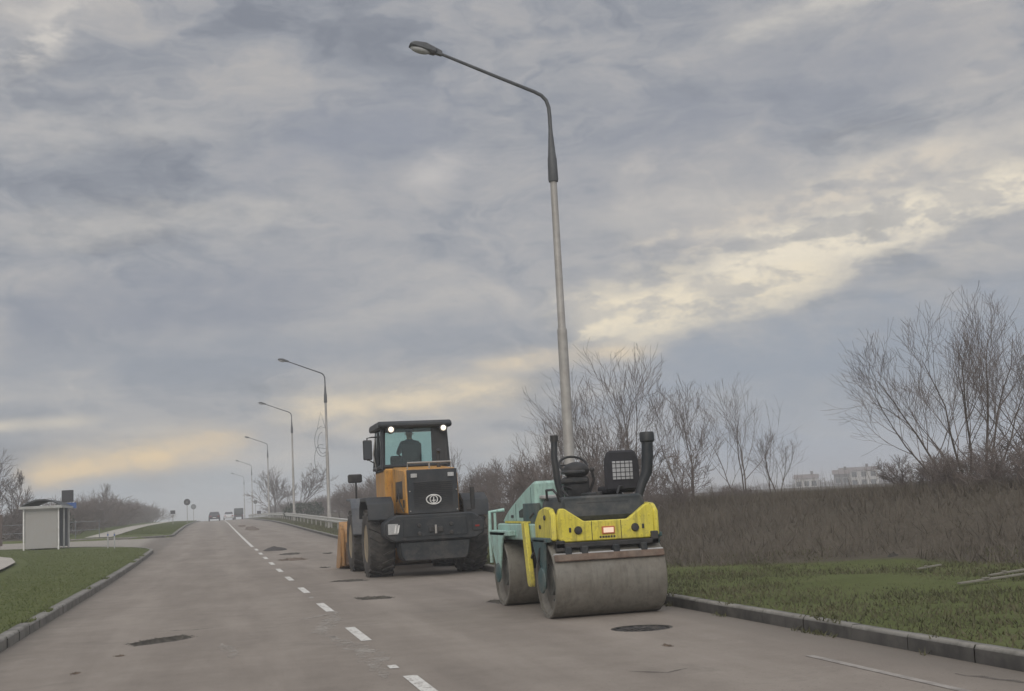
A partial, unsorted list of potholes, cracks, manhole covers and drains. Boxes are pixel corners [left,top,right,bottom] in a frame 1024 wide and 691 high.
crack [955,673,1024,683]
pothole [124,634,198,647]
